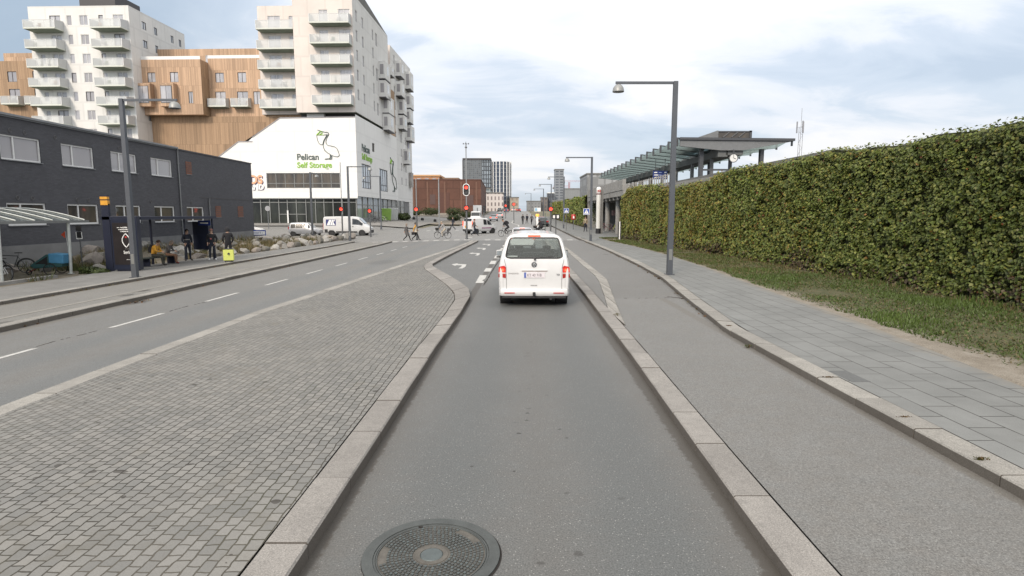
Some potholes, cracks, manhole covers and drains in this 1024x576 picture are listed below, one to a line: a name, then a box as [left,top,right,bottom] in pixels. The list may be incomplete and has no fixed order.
manhole cover [361,518,502,576]
